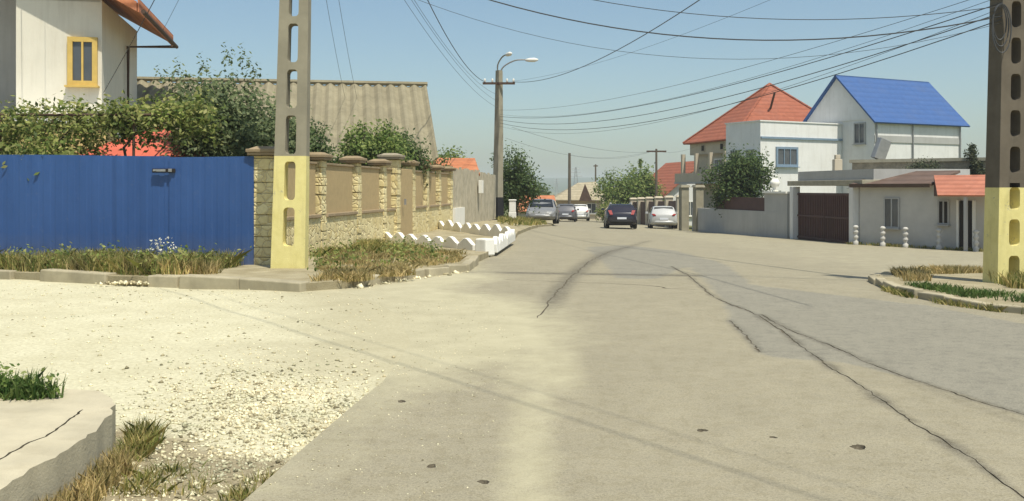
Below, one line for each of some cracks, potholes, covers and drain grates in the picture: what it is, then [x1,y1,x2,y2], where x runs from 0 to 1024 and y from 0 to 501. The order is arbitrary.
crack [505,241,1024,498]
